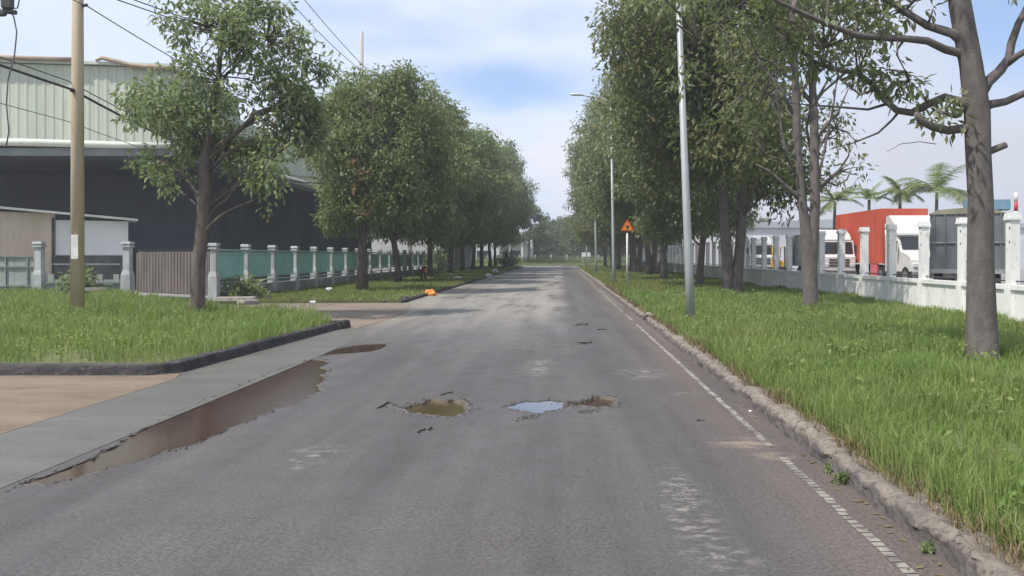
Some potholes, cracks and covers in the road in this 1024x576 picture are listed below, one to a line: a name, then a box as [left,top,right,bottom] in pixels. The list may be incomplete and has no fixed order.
pothole [385,396,482,418]
crack [376,401,399,409]
crack [416,426,435,435]
